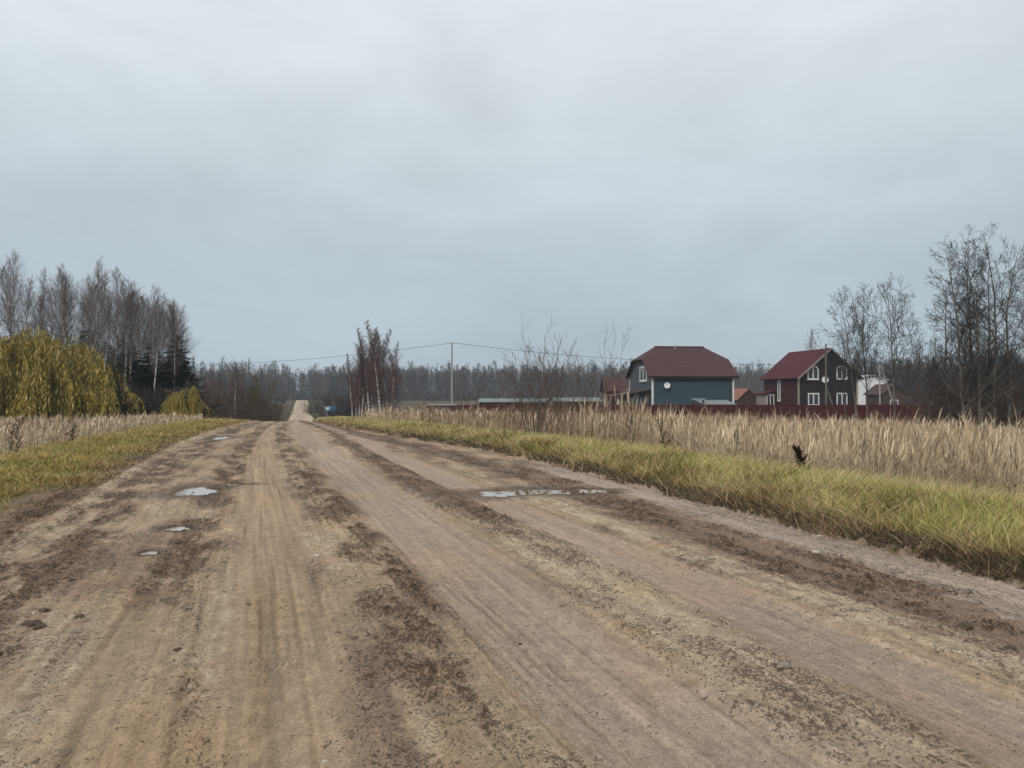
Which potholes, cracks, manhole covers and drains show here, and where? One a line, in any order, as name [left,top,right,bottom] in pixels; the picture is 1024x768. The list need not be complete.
pothole [168,484,220,497]
pothole [463,487,581,498]
